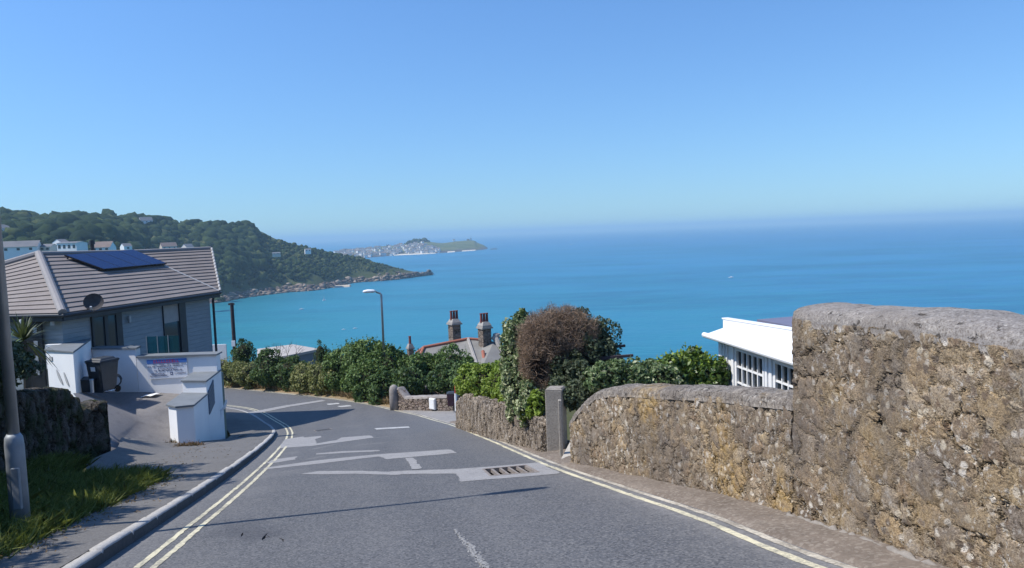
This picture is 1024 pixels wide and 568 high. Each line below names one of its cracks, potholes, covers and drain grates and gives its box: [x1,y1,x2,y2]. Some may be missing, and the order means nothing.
drain grate [482,465,539,476]
